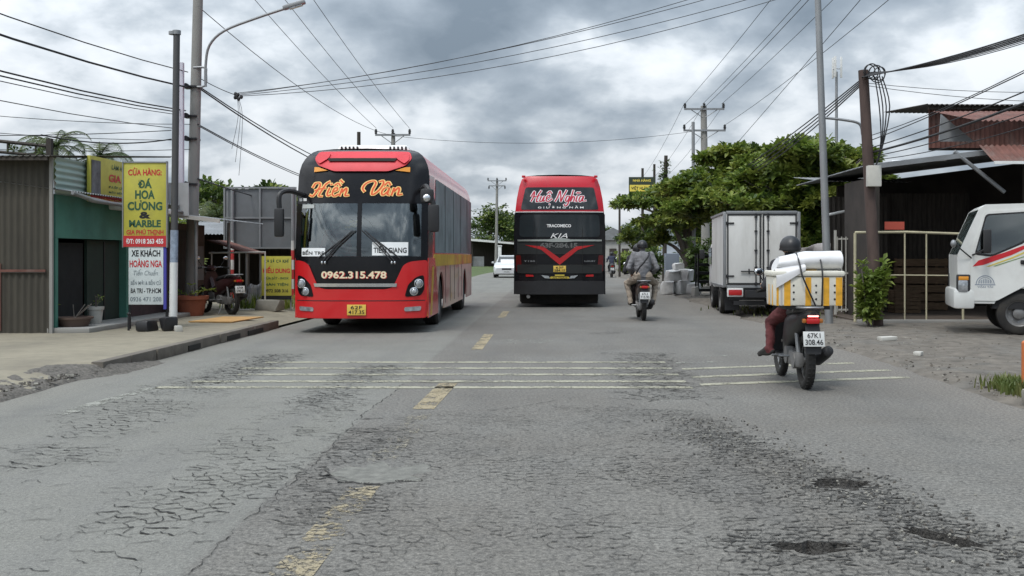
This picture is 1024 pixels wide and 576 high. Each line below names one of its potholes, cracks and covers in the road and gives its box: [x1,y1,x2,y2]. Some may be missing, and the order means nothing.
pothole [886,525,1005,552]
pothole [803,478,879,494]
pothole [749,539,869,558]
crack [0,353,1024,576]
